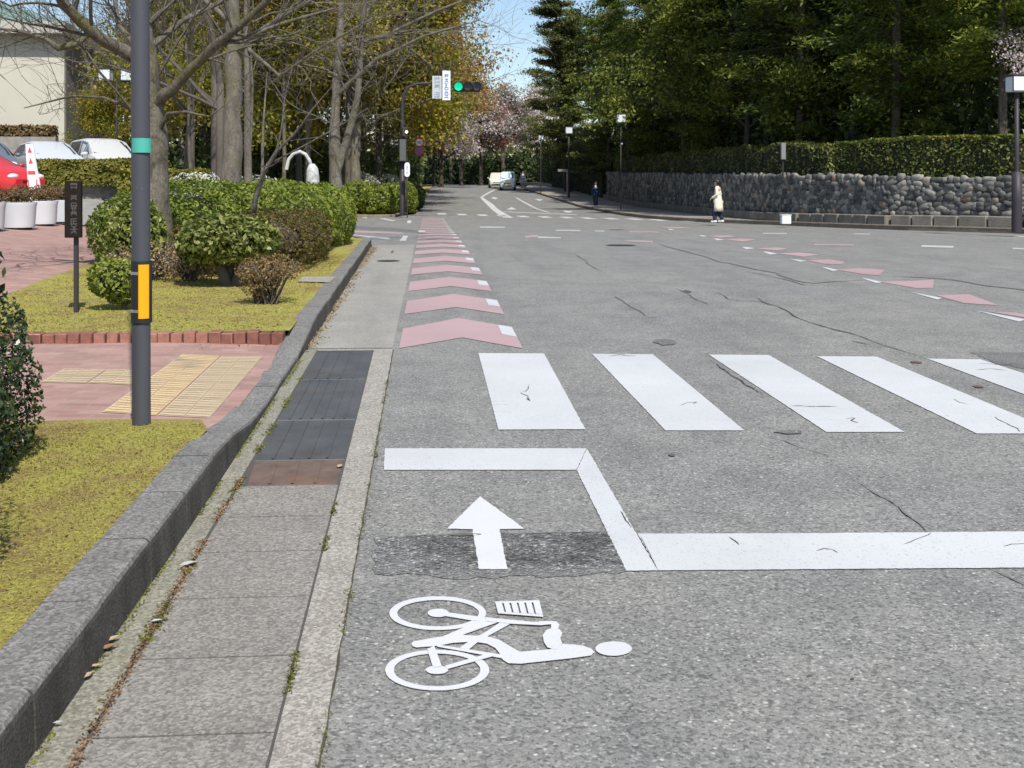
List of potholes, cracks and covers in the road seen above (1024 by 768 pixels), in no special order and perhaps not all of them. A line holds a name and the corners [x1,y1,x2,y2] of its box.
crack [678,289,925,358]
crack [859,482,930,543]
